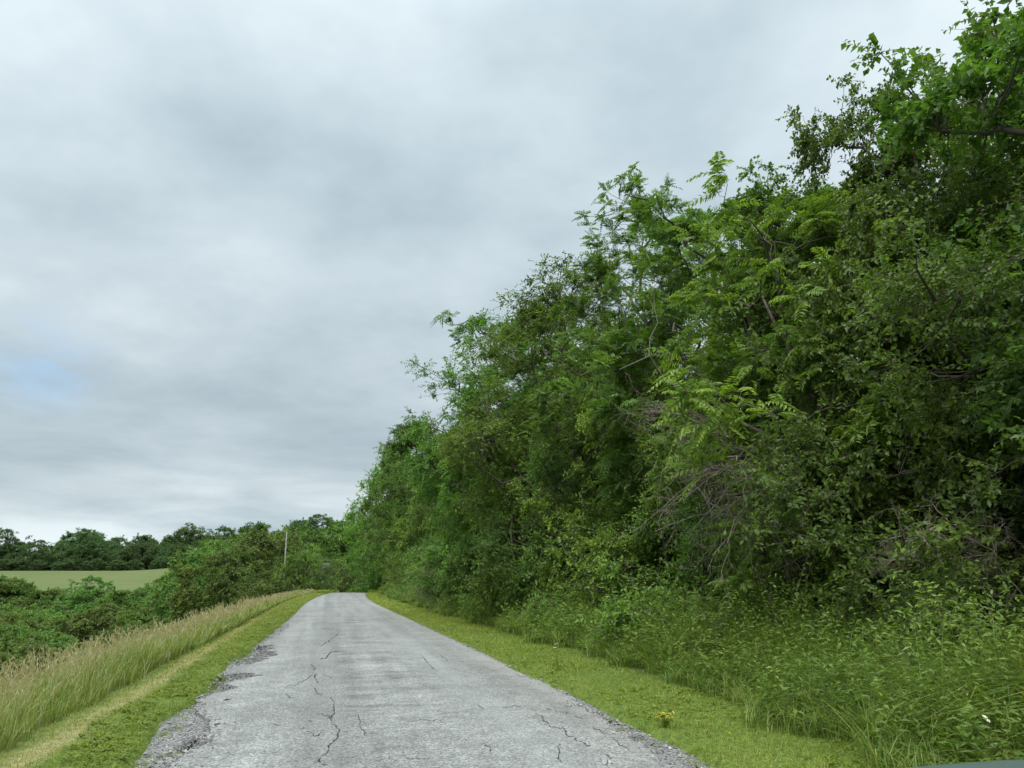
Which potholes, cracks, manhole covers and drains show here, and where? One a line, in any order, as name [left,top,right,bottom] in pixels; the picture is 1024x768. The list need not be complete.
pothole [178,734,212,752]
crack [284,628,340,766]
crack [503,704,627,766]
pothole [229,645,278,666]
pothole [200,673,264,699]
